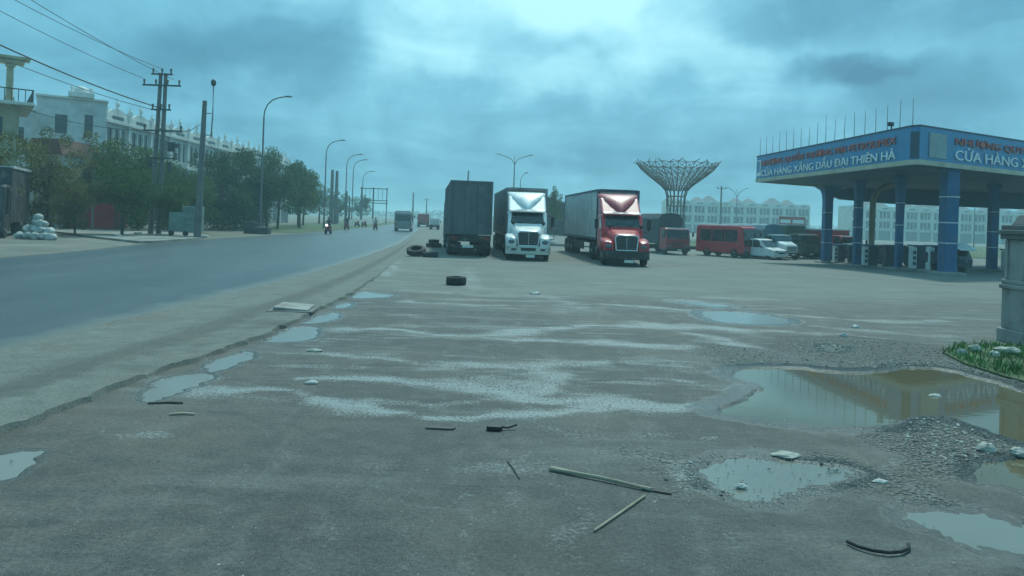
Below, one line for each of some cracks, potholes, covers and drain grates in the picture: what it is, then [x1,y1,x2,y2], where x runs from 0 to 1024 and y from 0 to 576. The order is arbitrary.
pothole [969,456,1024,491]
pothole [699,311,792,324]
pothole [694,455,869,505]
pothole [715,366,1024,442]
